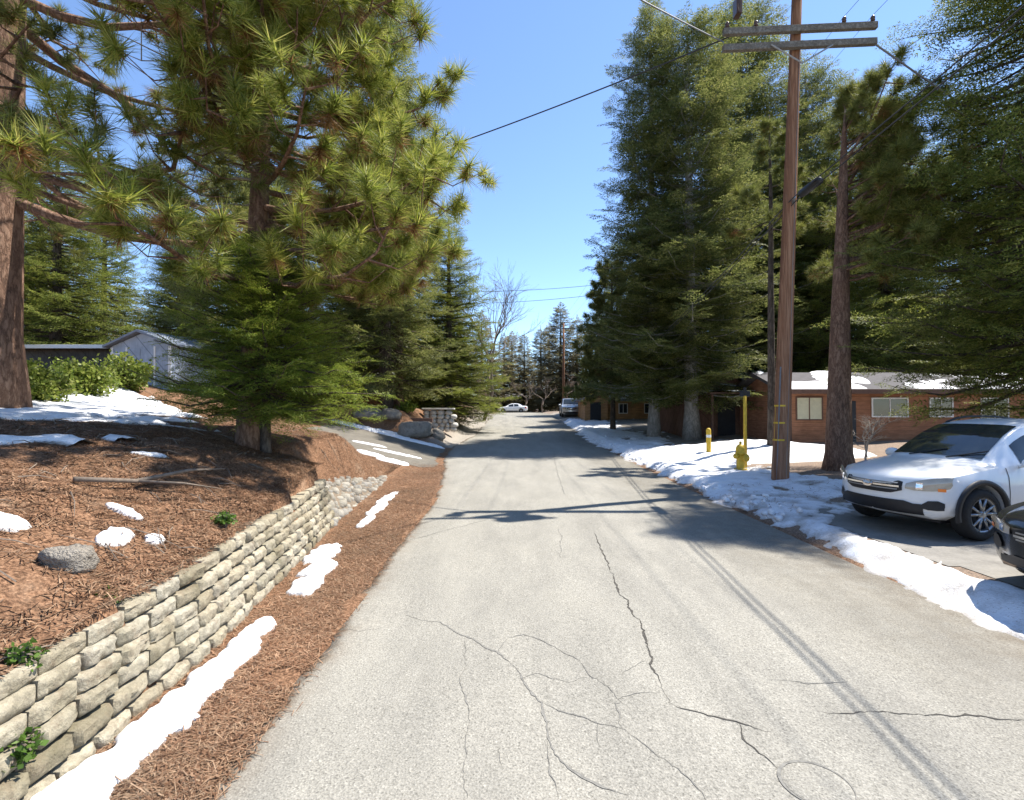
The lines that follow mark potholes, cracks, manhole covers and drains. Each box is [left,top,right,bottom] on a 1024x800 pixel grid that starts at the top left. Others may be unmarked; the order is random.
crack [407,615,706,799]
crack [825,711,1022,720]
crack [595,534,776,767]
